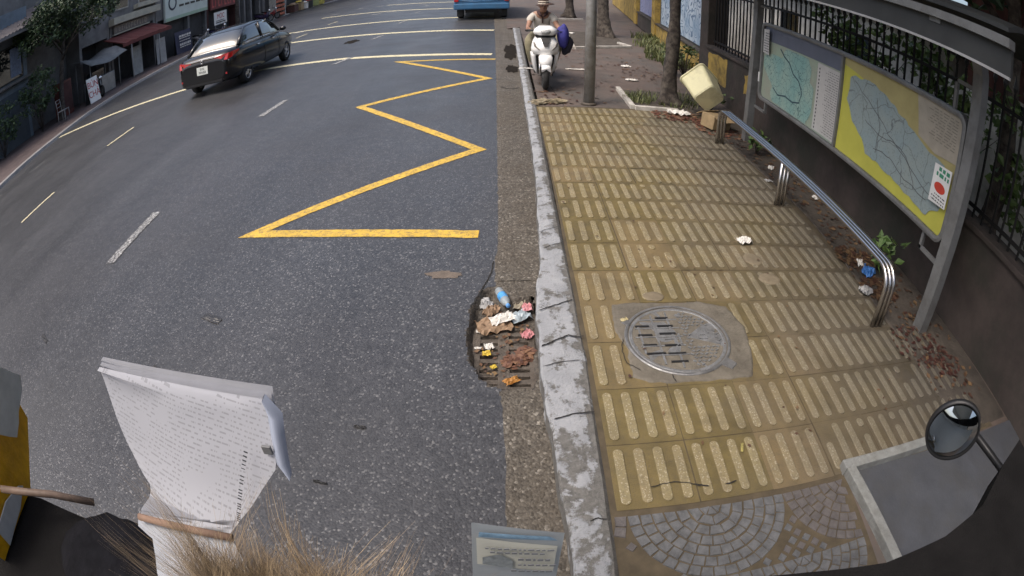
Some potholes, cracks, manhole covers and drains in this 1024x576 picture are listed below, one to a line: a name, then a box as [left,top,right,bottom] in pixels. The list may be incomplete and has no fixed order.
drain grate [472,327,537,390]
crack [470,261,494,307]
manhole cover [621,306,737,376]
